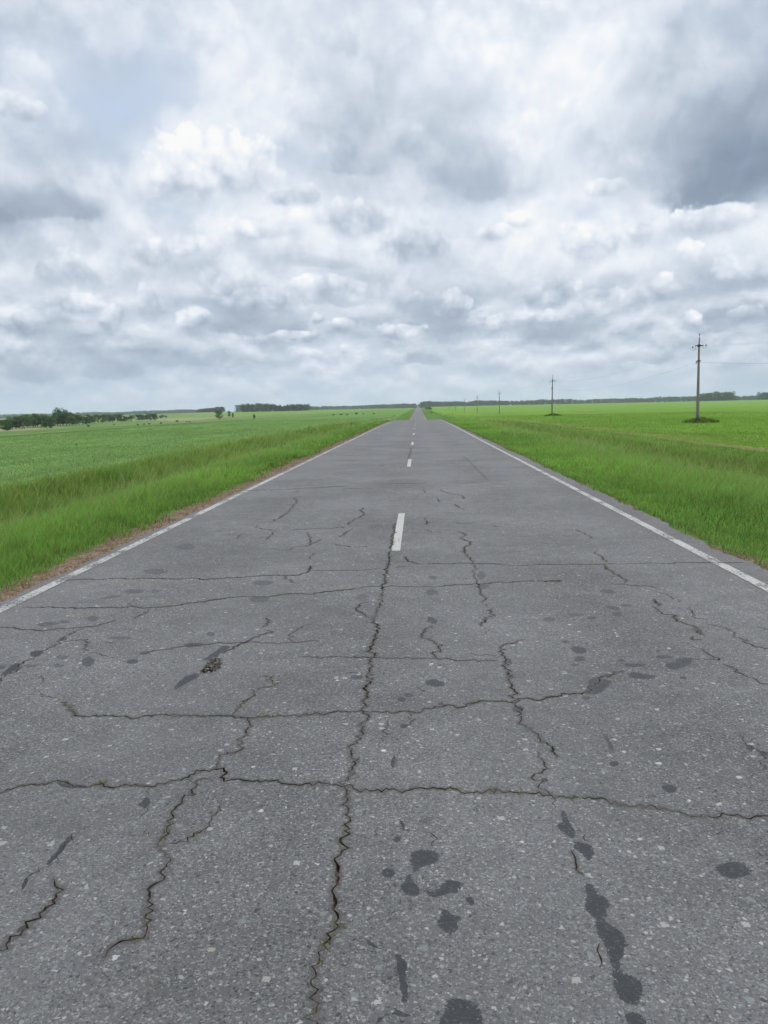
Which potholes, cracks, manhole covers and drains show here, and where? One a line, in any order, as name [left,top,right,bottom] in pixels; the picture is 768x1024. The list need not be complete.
crack [2,483,768,1024]
pothole [201,657,222,674]
